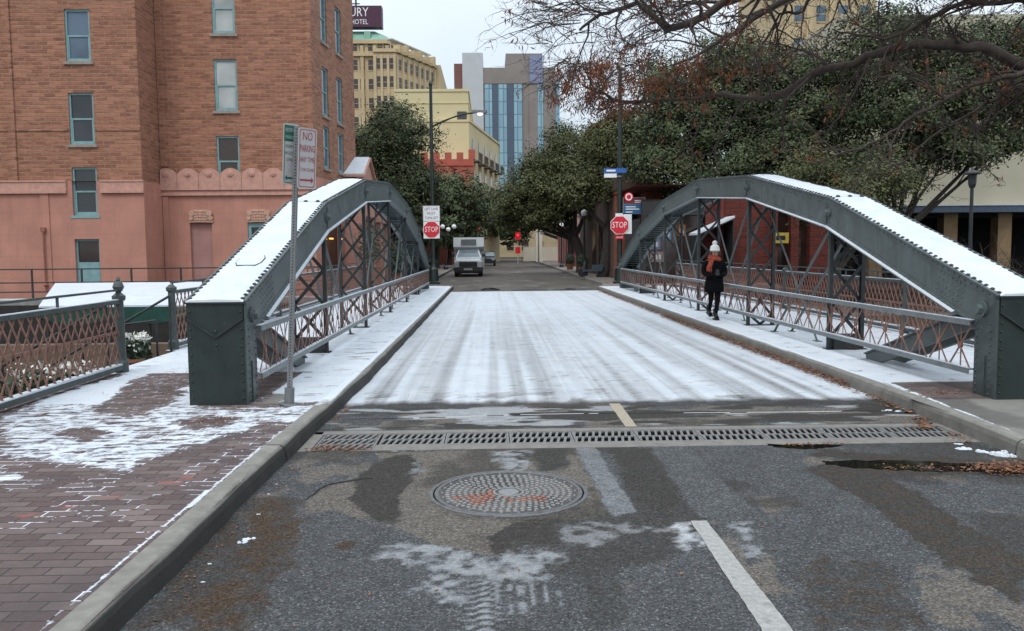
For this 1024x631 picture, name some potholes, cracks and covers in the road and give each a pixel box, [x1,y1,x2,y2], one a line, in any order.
manhole cover [429,470,588,517]
crack [306,478,372,499]
